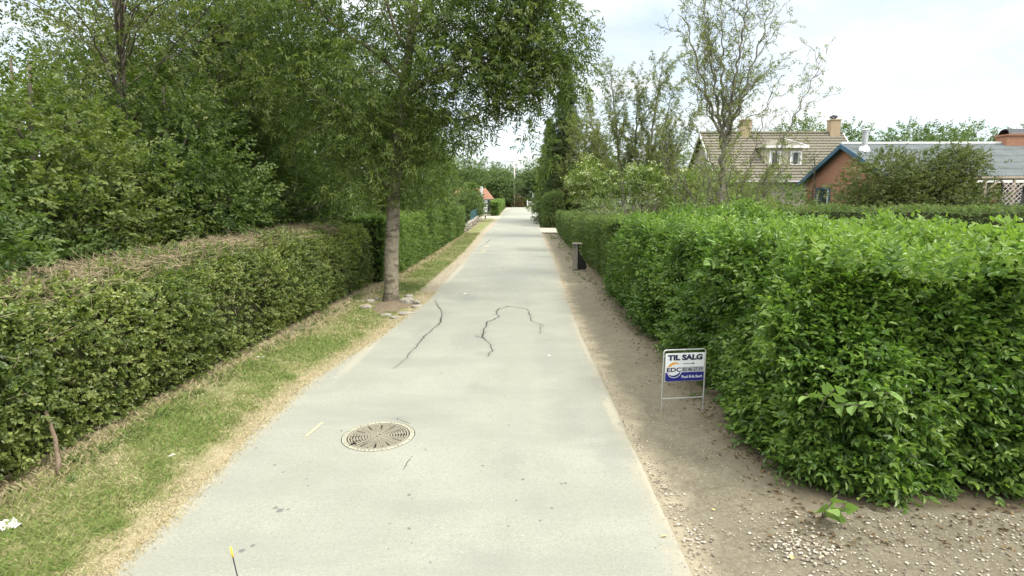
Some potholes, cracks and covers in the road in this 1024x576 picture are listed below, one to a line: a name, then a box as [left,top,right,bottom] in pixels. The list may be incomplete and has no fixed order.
crack [480,306,543,356]
crack [397,301,442,366]
manhole cover [341,421,415,452]
